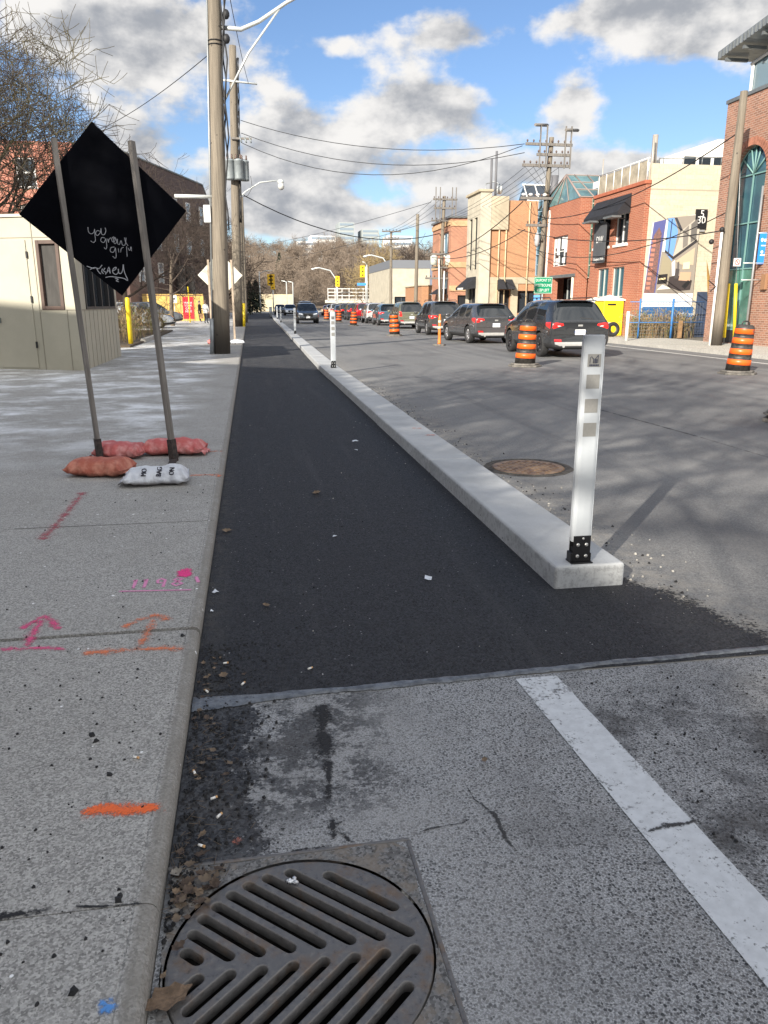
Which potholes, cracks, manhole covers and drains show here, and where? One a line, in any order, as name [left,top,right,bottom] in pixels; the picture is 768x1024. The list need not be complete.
crack [420,788,516,849]
drain grate [155,837,469,1024]
crack [648,820,696,832]
manhole cover [483,459,574,477]
